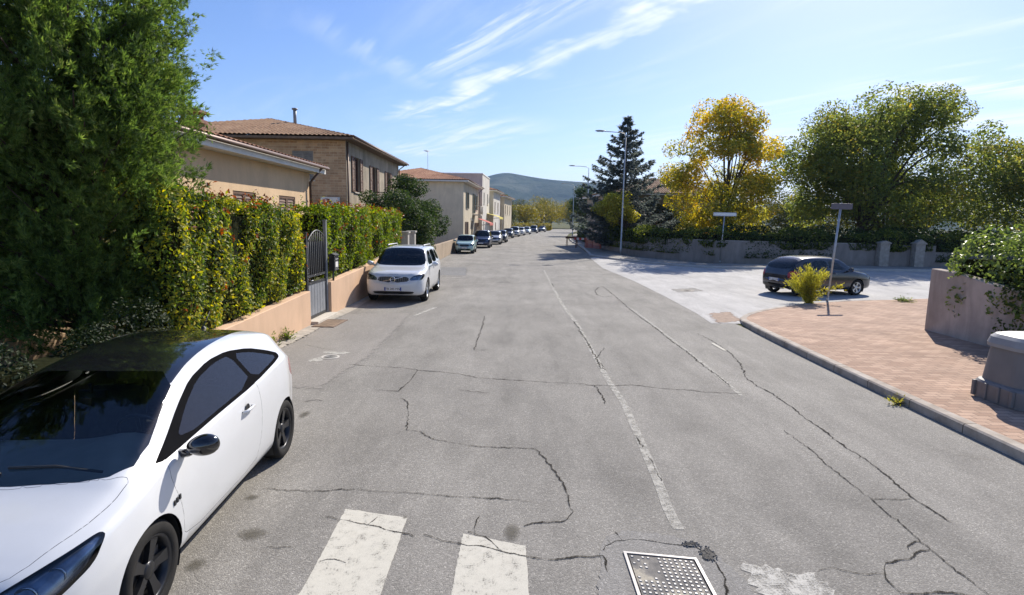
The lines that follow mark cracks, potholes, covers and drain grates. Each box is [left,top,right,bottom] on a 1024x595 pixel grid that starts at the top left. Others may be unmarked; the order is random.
crack [271,488,526,501]
manhole cover [311,319,347,328]
crack [354,321,741,526]
crack [697,333,989,595]
